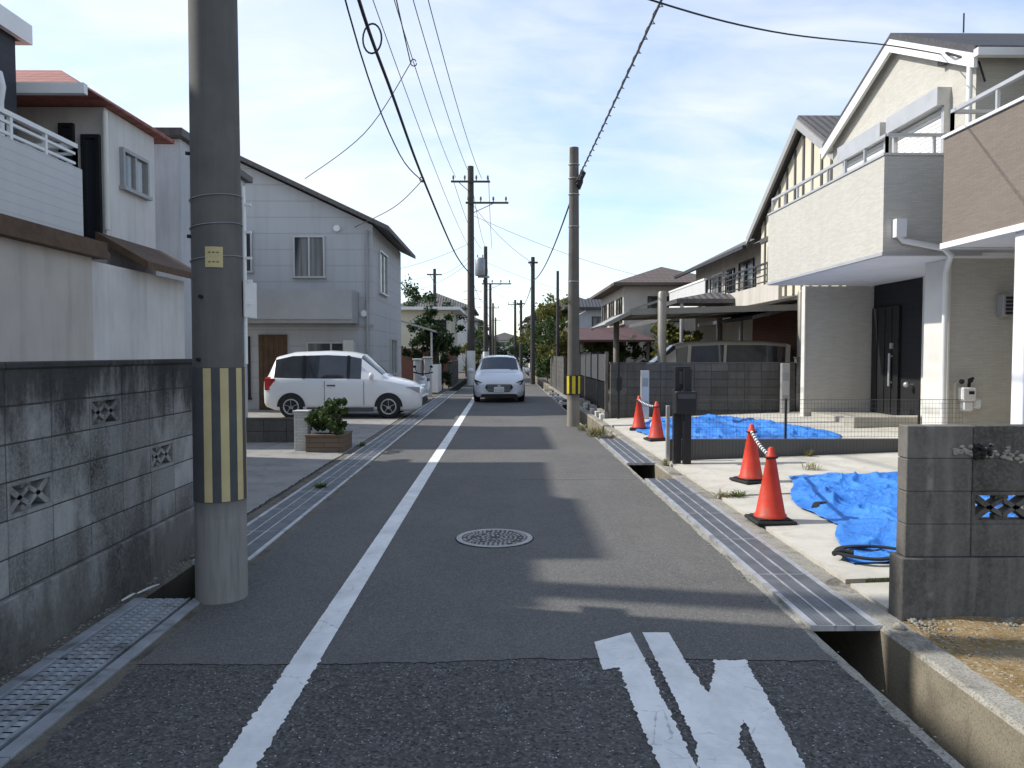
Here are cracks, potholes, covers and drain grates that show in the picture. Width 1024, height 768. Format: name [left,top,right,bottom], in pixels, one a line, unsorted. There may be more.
manhole cover [455,529,534,548]
drain grate [297,477,351,493]
drain grate [713,538,810,577]
drain grate [616,453,655,465]
drain grate [360,442,395,450]
drain grate [607,445,641,454]
drain grate [0,658,131,761]
drain grate [662,494,725,516]
drain grate [318,466,365,478]
drain grate [247,508,313,533]
drain grate [753,574,882,631]
drain grate [45,598,200,664]
